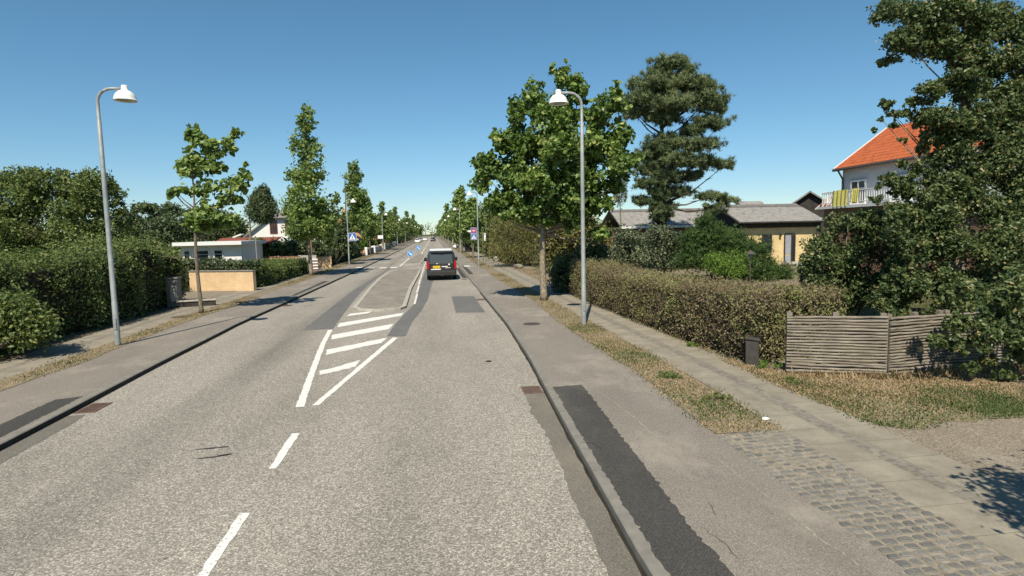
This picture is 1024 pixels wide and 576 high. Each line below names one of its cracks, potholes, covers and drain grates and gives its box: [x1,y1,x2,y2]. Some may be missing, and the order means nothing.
drain grate [521,386,544,394]
drain grate [73,402,113,414]
